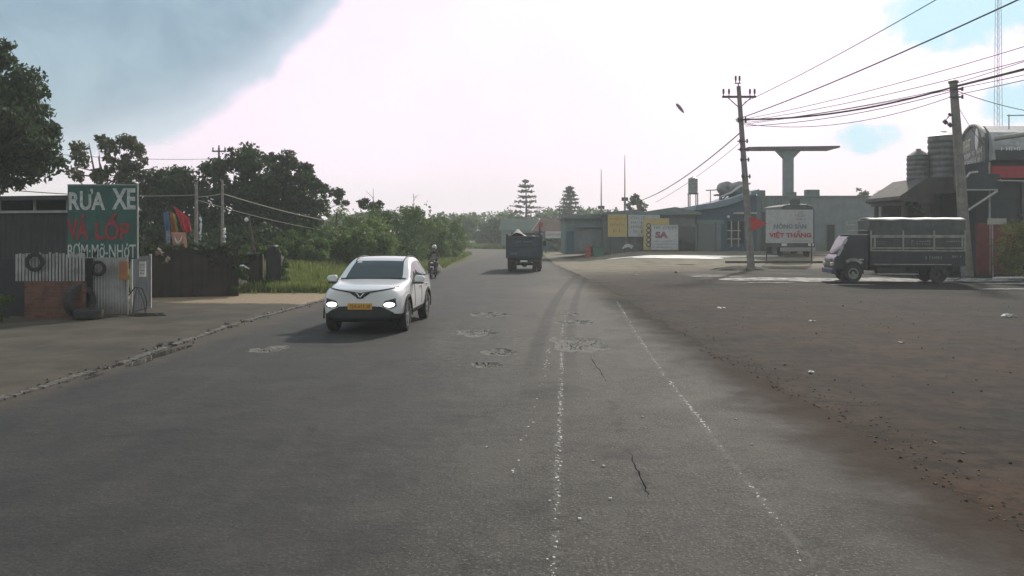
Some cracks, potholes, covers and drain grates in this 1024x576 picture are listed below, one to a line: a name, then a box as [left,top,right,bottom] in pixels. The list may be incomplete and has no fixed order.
crack [629,452,650,500]
pothole [248,345,291,353]
pothole [480,348,518,356]
pothole [549,336,611,353]
pothole [456,329,500,338]
